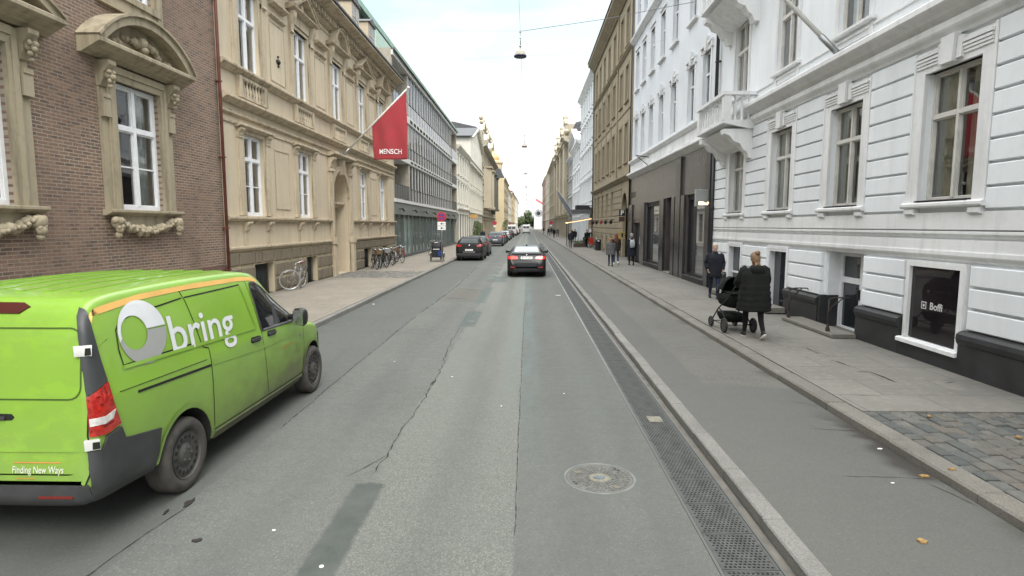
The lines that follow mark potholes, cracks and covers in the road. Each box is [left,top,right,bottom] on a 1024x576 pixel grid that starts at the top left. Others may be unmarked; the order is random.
crack [348,330,458,476]
crack [281,268,477,428]
manhole cover [563,463,636,494]
